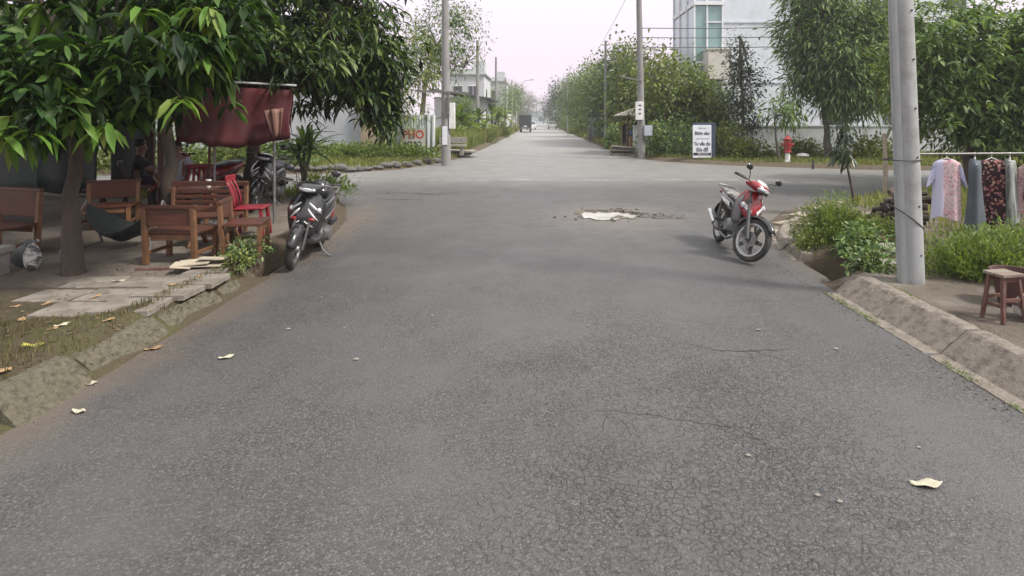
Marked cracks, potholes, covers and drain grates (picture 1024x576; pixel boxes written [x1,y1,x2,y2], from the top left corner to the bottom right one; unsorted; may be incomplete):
pothole [553,208,655,222]
crack [393,326,1023,576]
